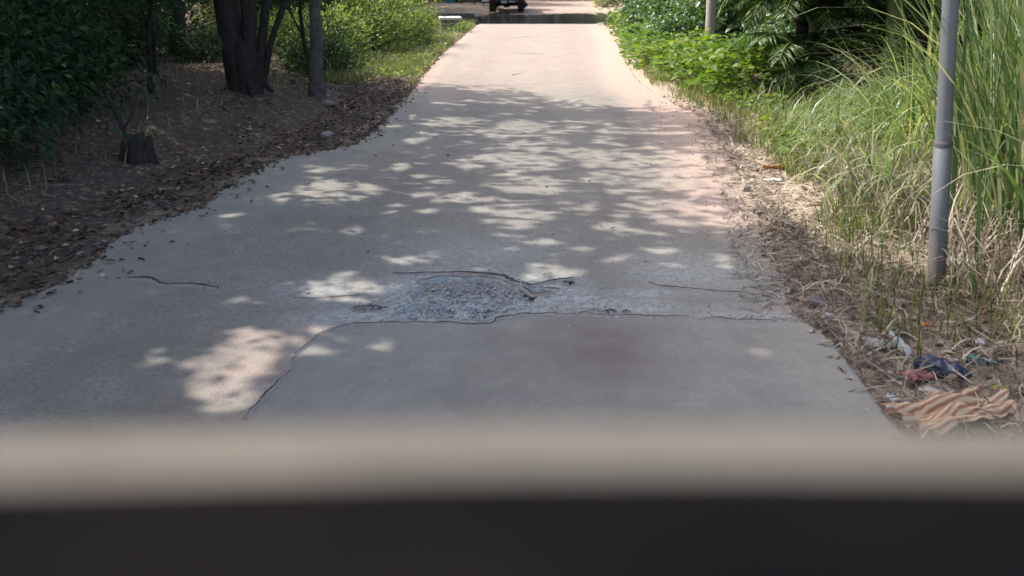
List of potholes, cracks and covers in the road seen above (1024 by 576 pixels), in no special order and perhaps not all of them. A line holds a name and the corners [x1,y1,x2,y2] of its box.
crack [125,276,218,290]
crack [240,271,790,420]
pothole [387,274,566,323]
